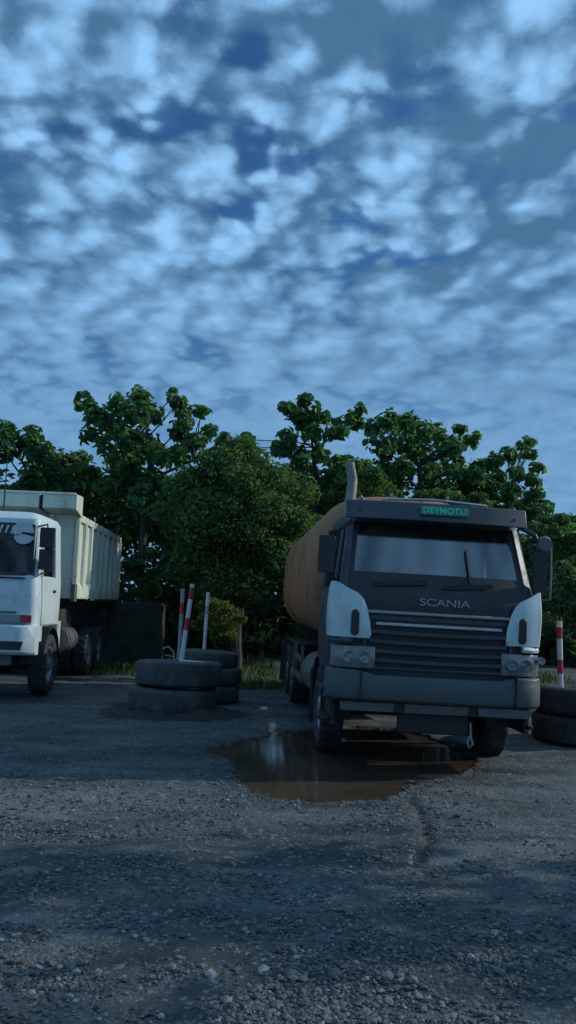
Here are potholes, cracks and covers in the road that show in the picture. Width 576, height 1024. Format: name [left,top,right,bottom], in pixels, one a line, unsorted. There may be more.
pothole [196,725,488,807]
